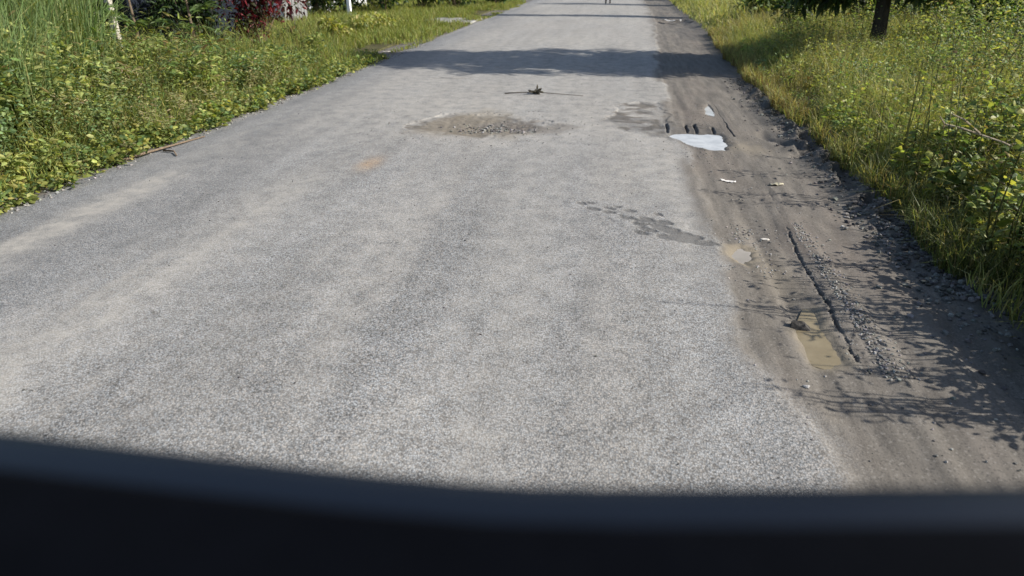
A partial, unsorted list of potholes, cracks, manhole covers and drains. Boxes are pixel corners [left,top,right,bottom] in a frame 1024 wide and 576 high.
pothole [777,303,863,381]
pothole [397,111,579,140]
pothole [712,239,774,274]
crack [561,171,876,371]
